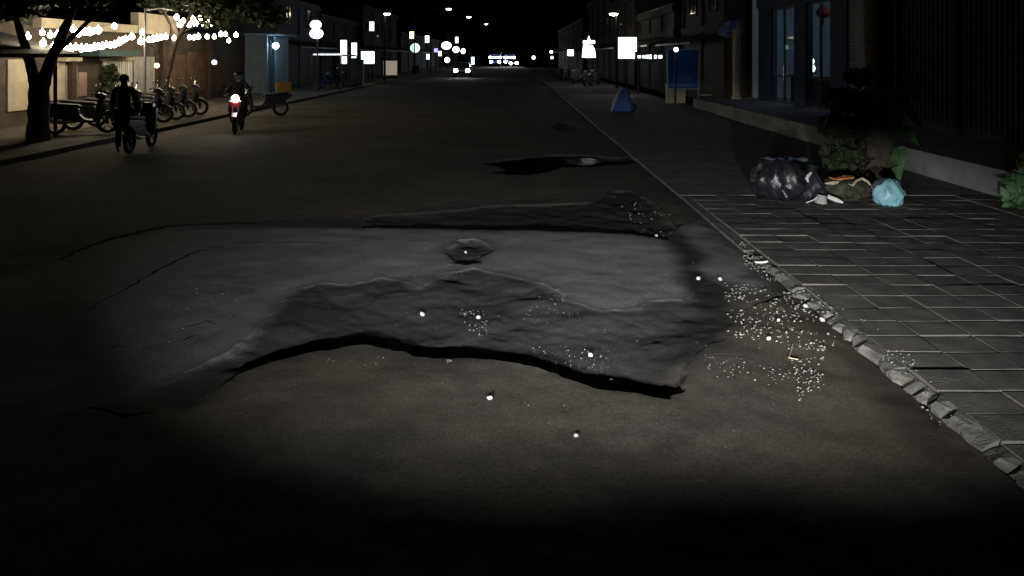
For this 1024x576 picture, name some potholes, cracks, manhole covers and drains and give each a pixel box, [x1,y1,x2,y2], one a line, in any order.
pothole [361,190,675,240]
crack [80,407,157,418]
pothole [151,268,736,409]
crack [108,288,277,351]
pothole [484,154,635,175]
pothole [444,238,495,265]
